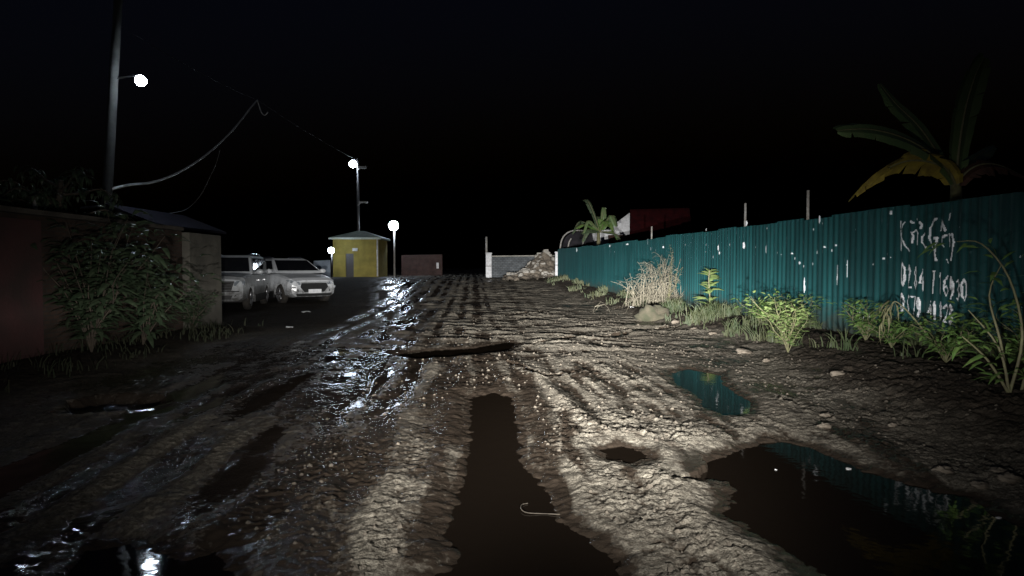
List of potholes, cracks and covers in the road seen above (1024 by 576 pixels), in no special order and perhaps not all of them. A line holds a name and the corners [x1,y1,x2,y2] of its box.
pothole [374,384,669,576]
pothole [380,338,530,359]
pothole [654,363,775,419]
pothole [666,428,1024,576]
